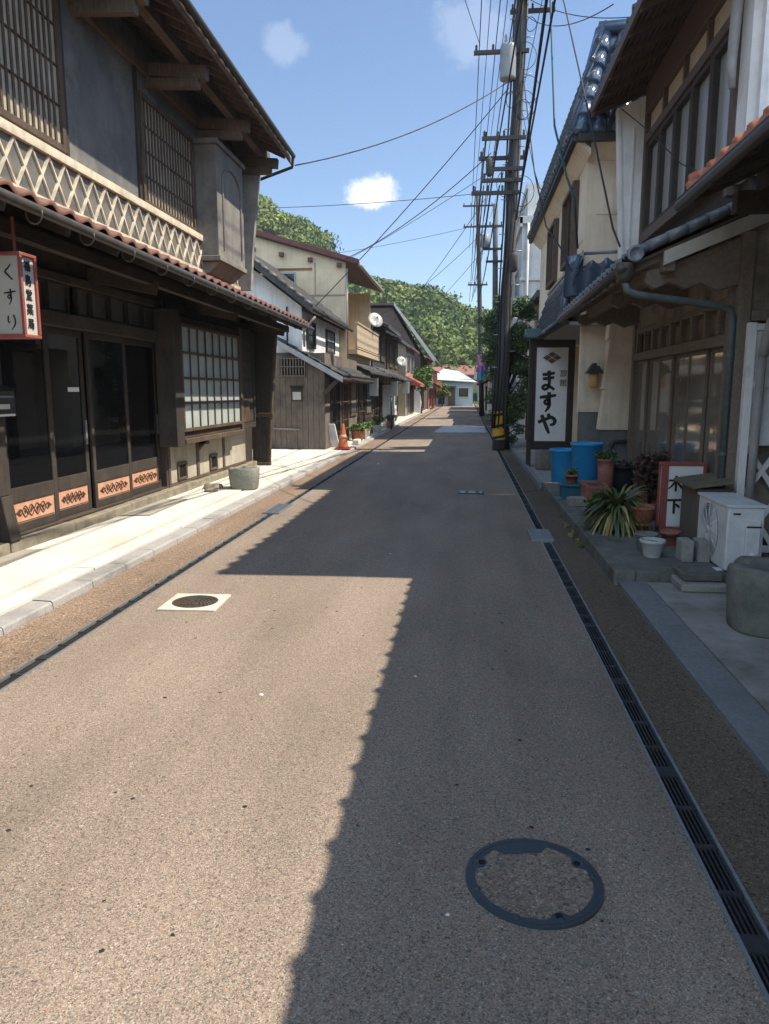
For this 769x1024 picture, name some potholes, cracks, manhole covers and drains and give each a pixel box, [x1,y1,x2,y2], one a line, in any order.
manhole cover [157,593,231,612]
manhole cover [465,838,604,930]
